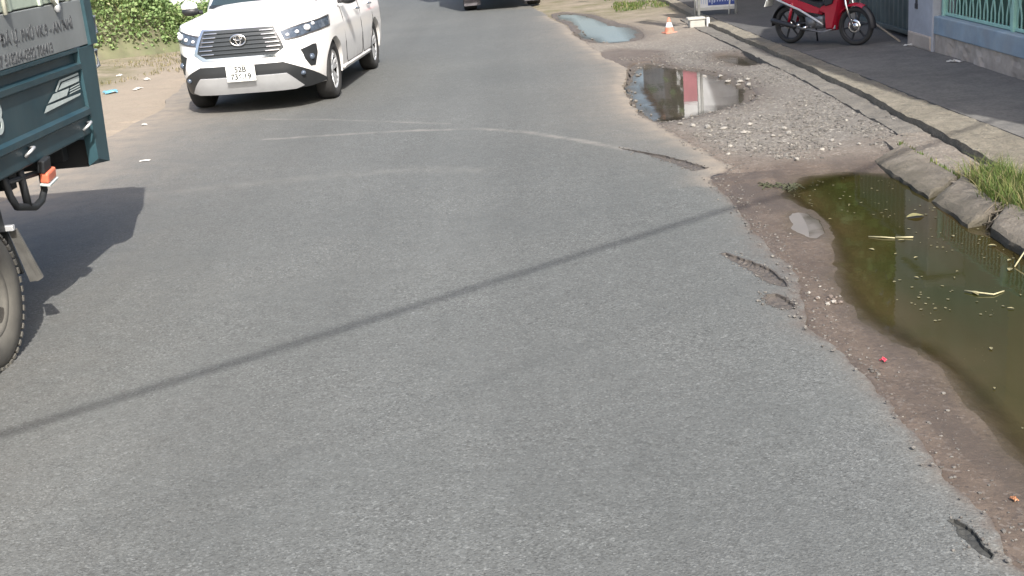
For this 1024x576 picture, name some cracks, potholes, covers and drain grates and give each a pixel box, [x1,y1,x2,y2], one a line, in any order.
pothole [624,63,756,123]
pothole [947,519,995,560]
crack [621,148,709,171]
pothole [720,252,789,287]
pothole [551,12,644,43]
pothole [764,293,797,310]
